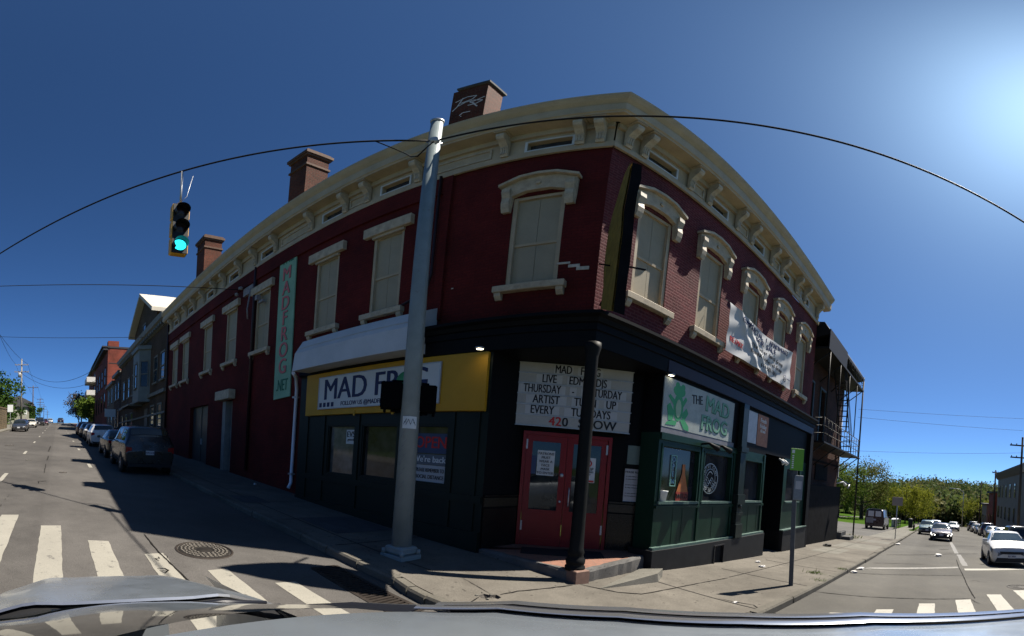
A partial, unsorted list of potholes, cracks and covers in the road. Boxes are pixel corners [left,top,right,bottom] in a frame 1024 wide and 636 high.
manhole cover [175,541,233,560]
